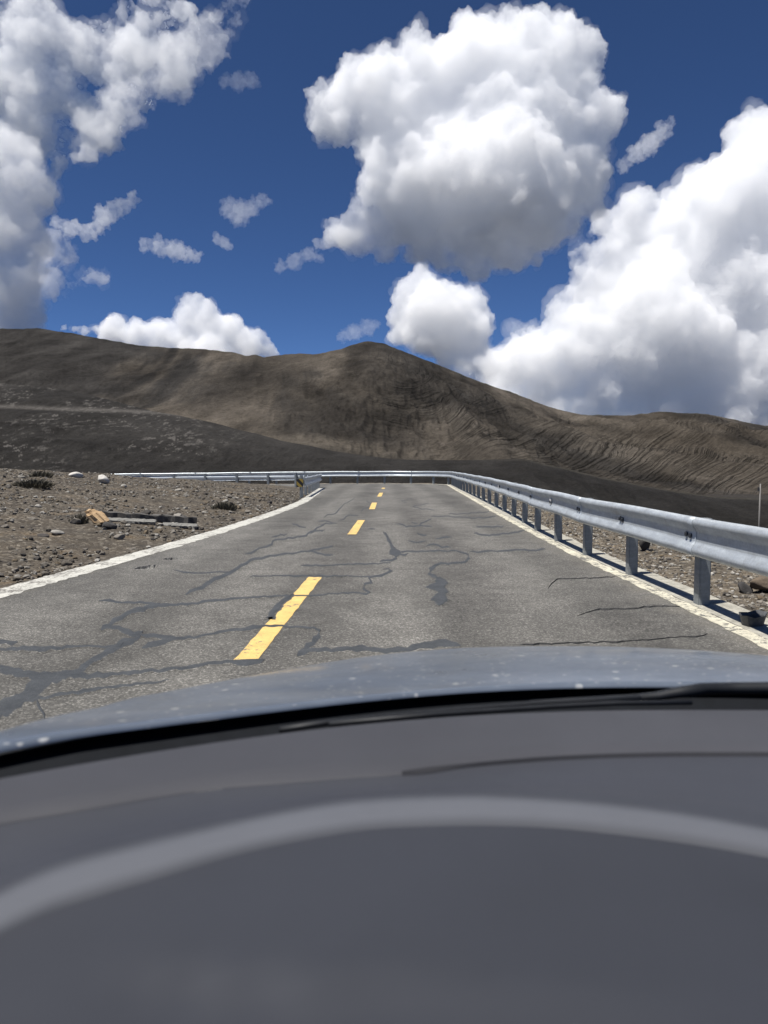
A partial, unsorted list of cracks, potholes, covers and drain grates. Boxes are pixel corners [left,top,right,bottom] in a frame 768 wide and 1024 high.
crack [548,576,615,588]
crack [301,551,391,567]
crack [272,497,375,538]
crack [578,605,680,616]
crack [521,633,708,646]
